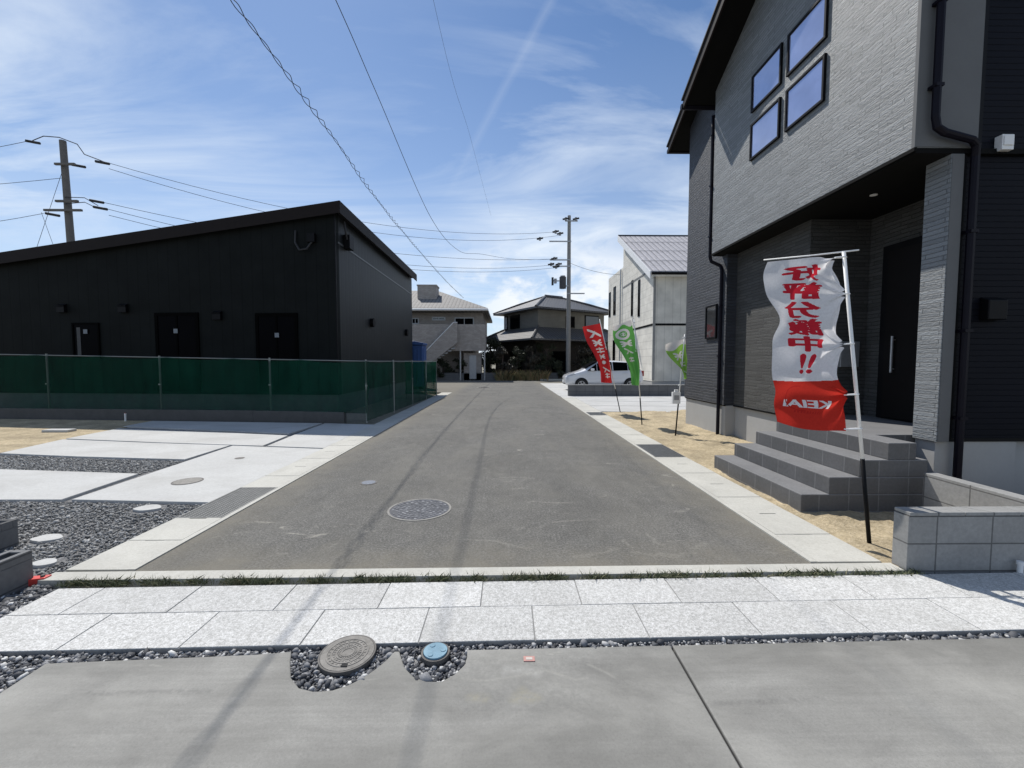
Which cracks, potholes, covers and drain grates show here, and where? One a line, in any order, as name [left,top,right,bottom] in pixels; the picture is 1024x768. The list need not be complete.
drain grate [636,444,685,457]
manhole cover [387,499,451,521]
manhole cover [318,635,376,679]
drain grate [177,487,278,519]
